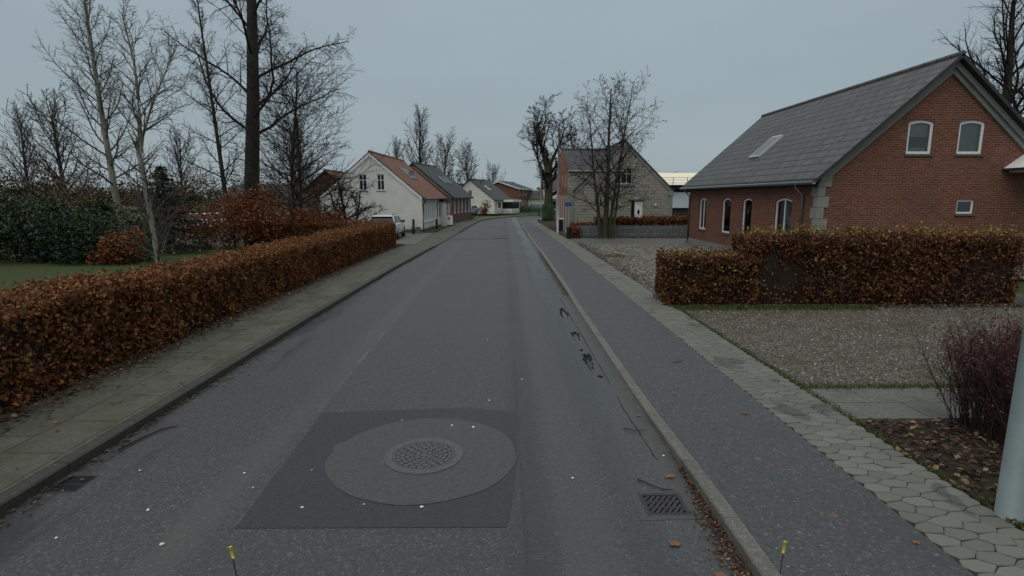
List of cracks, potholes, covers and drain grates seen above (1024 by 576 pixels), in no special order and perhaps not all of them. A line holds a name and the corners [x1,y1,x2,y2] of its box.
pothole [582,353,594,371]
drain grate [46,475,99,492]
drain grate [638,493,692,515]
manhole cover [384,438,463,474]
